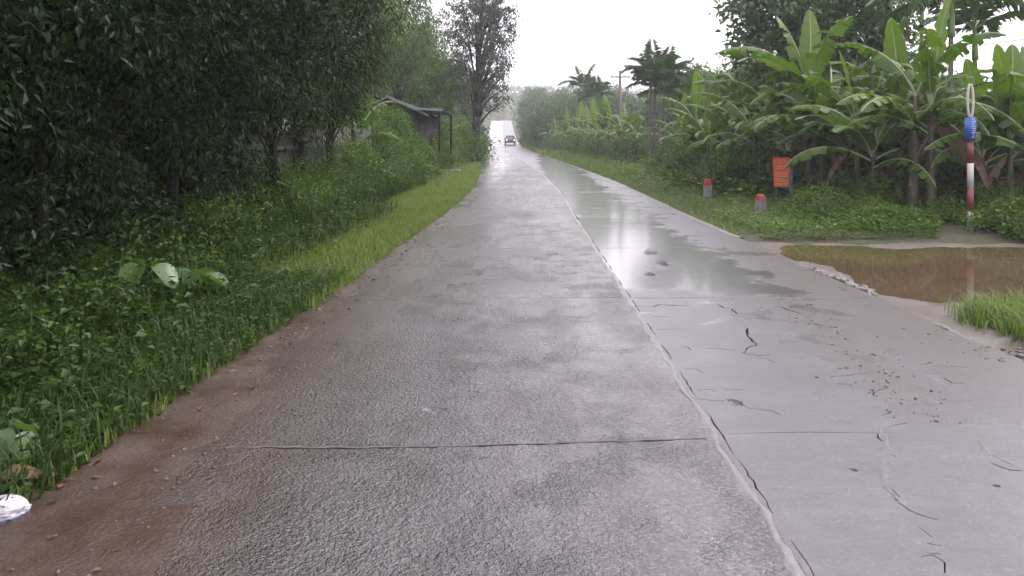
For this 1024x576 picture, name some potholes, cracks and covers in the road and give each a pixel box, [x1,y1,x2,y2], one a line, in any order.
crack [891,488,946,573]
crack [681,300,775,363]
crack [685,368,781,415]
